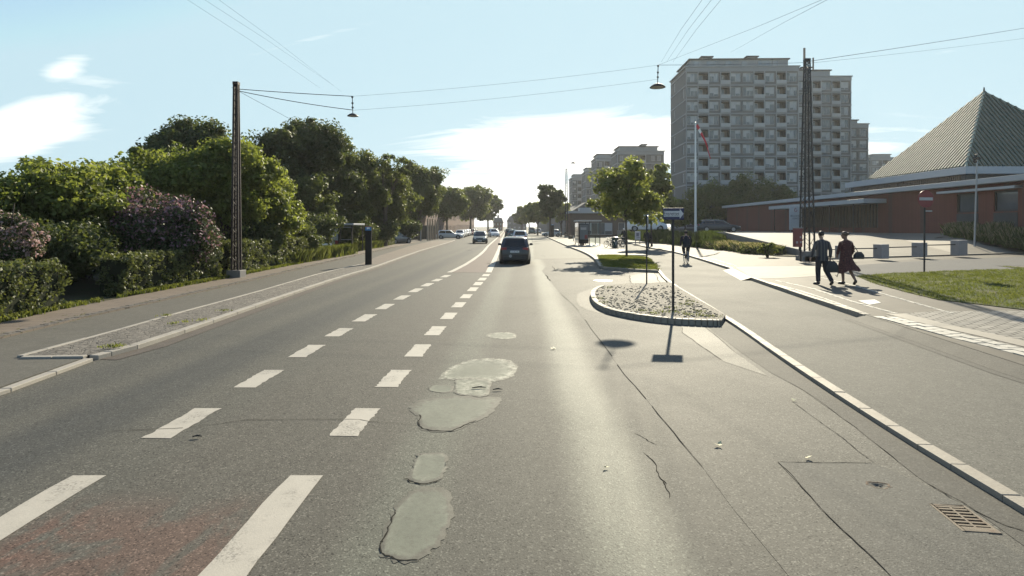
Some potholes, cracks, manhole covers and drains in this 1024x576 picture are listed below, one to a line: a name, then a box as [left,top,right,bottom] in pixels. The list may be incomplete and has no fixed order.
drain grate [930,504,1002,534]
pothole [866,481,891,489]
crack [637,434,670,498]
